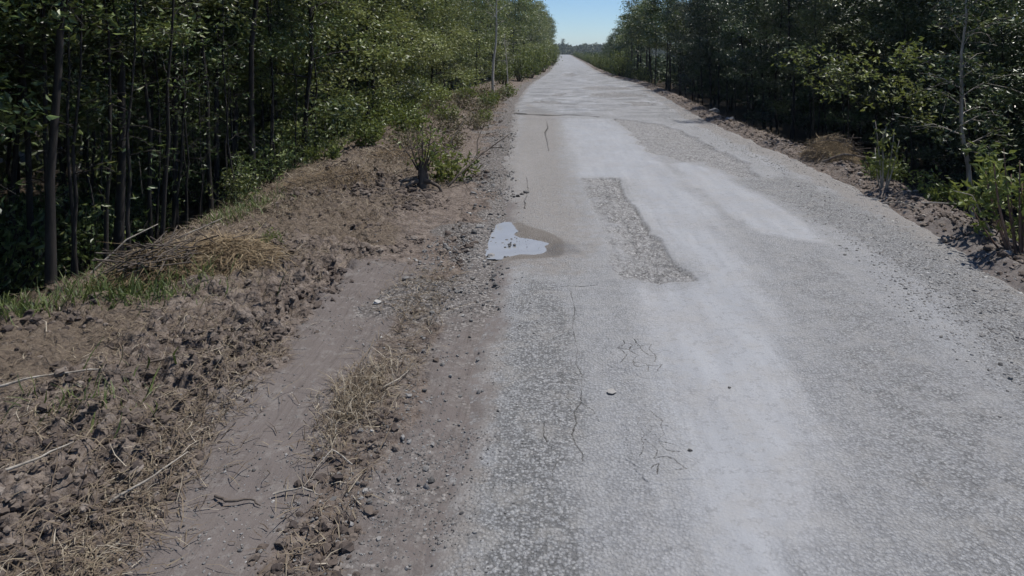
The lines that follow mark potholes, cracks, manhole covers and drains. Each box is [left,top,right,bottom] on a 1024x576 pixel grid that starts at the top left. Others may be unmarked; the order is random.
crack [528,281,704,491]
crack [510,175,540,212]
pothole [485,217,584,271]
crack [512,111,621,153]
